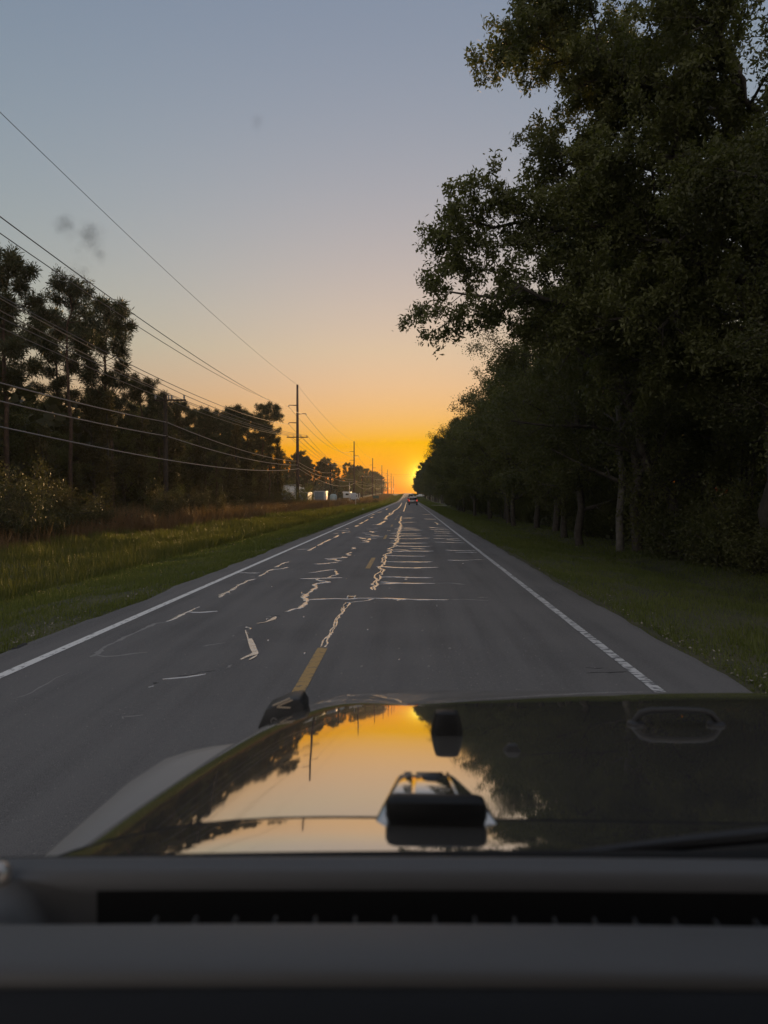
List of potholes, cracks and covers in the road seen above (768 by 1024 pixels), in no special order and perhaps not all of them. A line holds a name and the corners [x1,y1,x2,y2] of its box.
crack [370,514,488,601]
crack [148,625,258,688]
